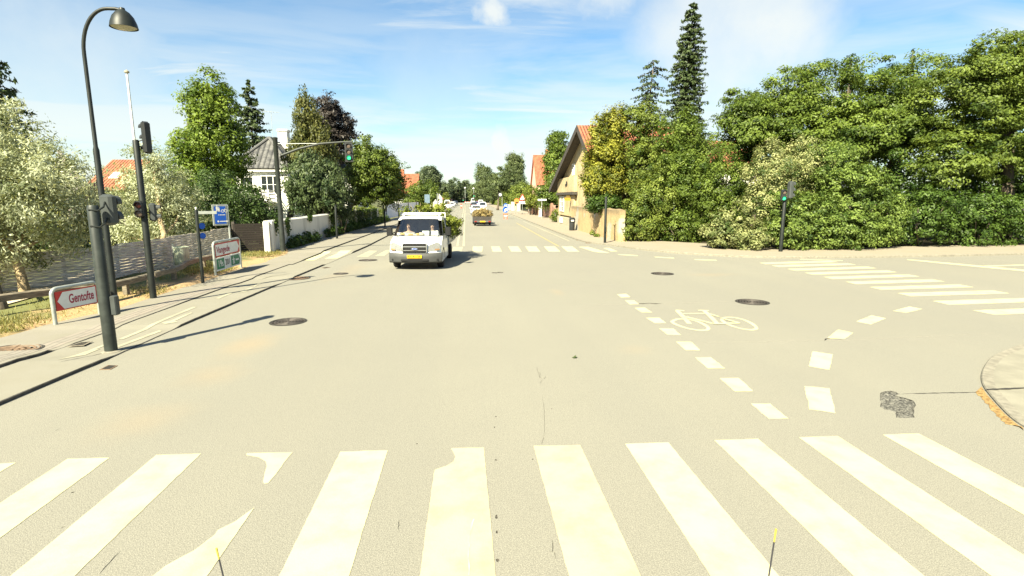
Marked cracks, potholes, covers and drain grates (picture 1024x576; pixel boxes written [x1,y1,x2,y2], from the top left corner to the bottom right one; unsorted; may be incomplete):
manhole cover [269,318,307,326]
